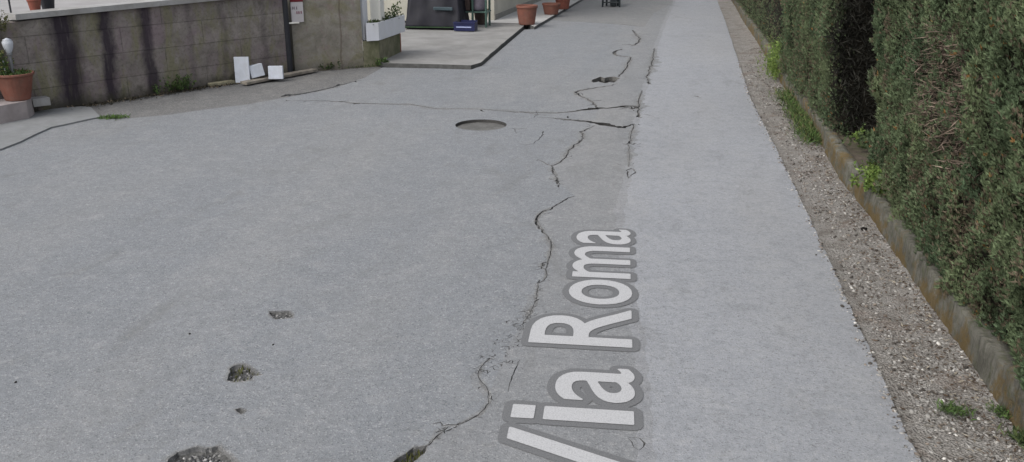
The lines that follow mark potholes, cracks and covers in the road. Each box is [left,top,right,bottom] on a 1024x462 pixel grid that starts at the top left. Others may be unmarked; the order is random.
crack [281,20,655,445]
manhole cover [455,119,507,131]
pothole [269,311,293,319]
pothole [167,446,236,462]
pothole [227,364,262,382]
